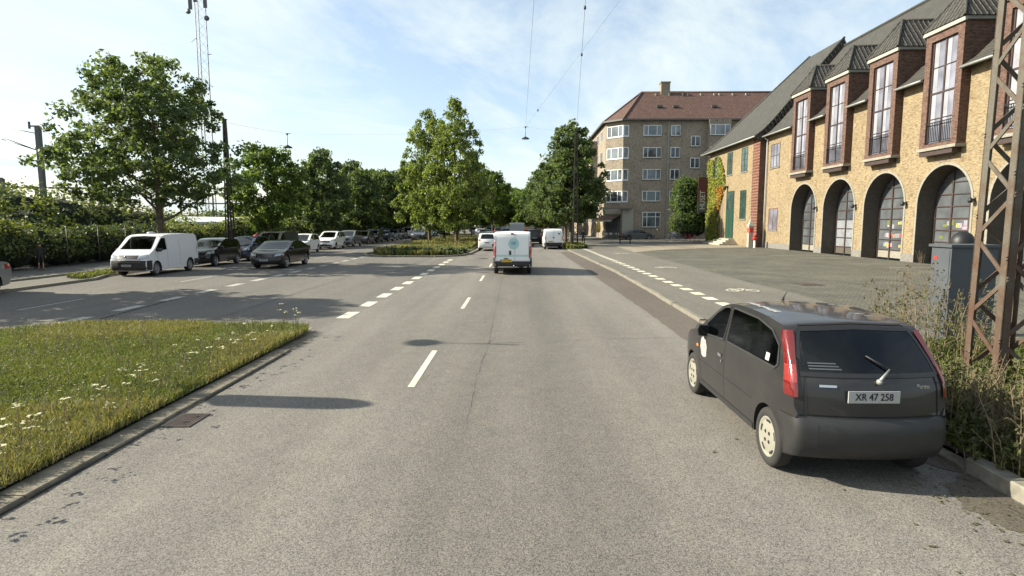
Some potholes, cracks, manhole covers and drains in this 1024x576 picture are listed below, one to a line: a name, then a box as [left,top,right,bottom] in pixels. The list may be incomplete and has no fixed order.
drain grate [160,413,211,428]
